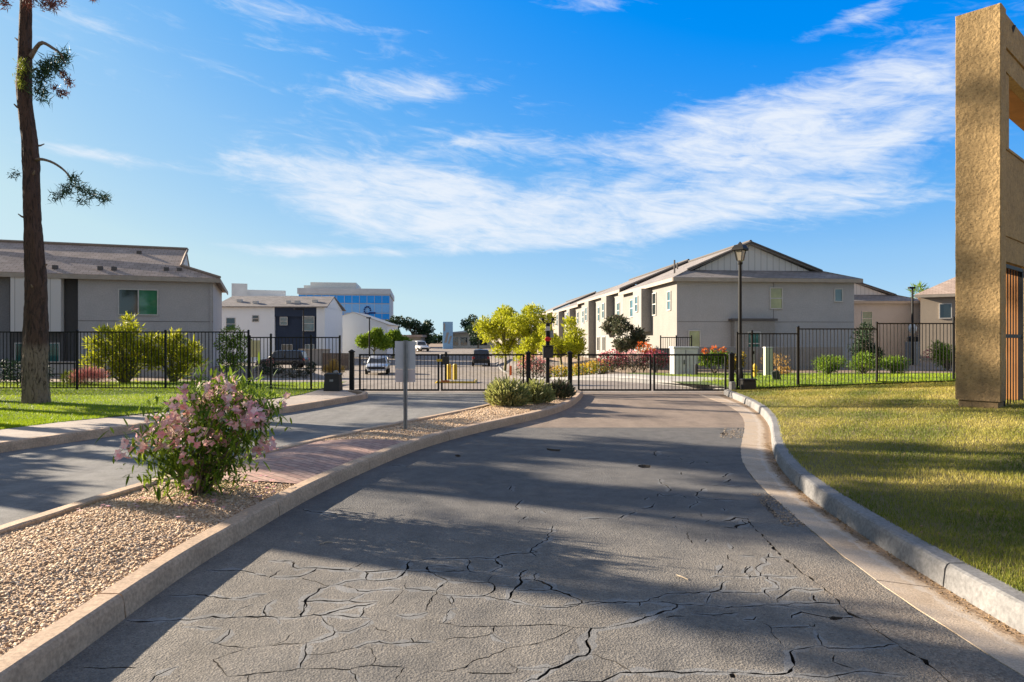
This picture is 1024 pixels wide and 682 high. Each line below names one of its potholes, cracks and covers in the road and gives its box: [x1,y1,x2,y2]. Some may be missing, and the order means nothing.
crack [127,452,950,682]
crack [84,667,176,682]
